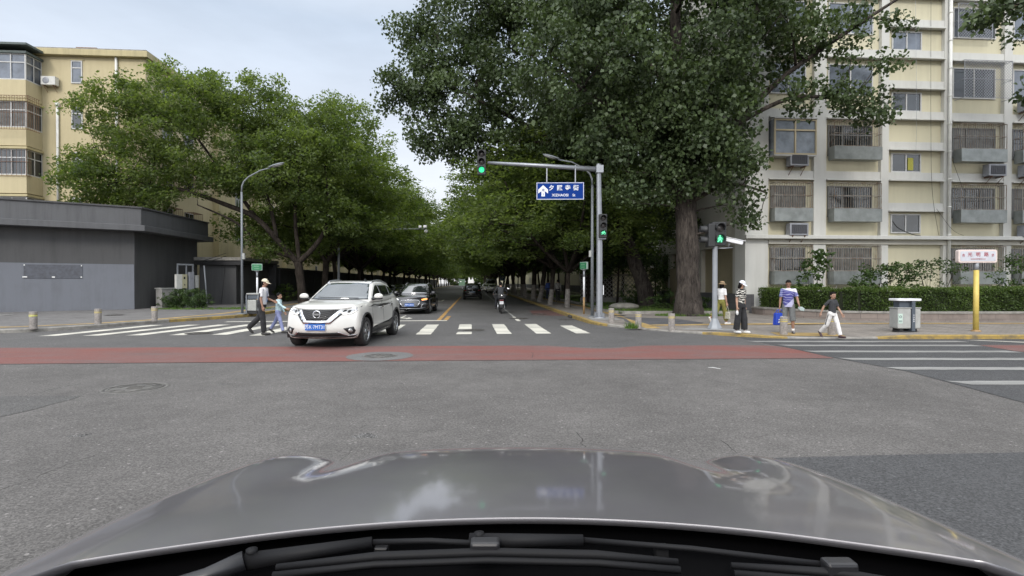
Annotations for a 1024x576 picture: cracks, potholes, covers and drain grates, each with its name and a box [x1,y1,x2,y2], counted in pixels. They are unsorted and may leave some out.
manhole cover [99,382,170,394]
manhole cover [346,352,413,361]
